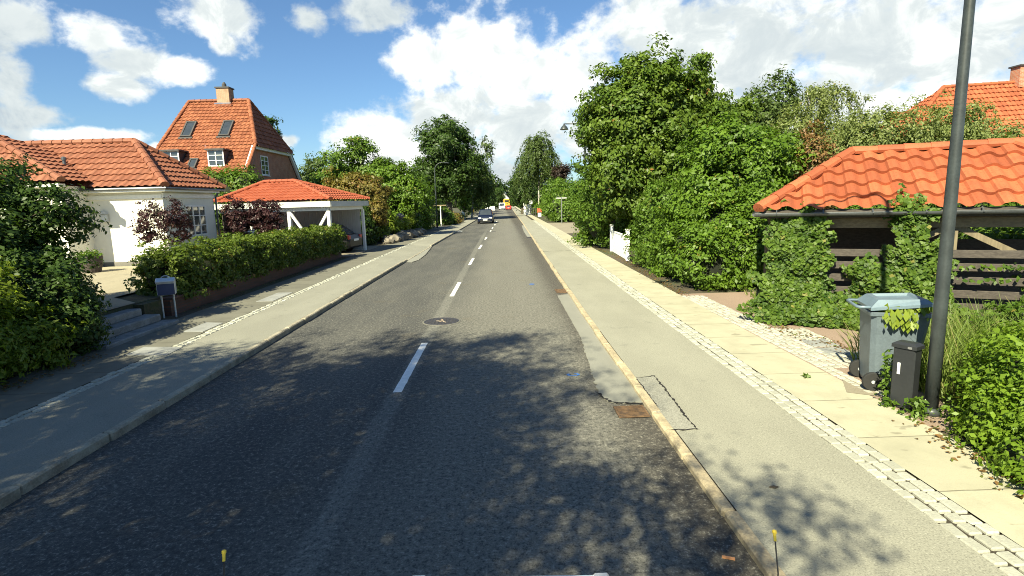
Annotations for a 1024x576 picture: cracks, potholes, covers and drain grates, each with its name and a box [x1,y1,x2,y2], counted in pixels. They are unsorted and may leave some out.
manhole cover [422,317,461,326]
